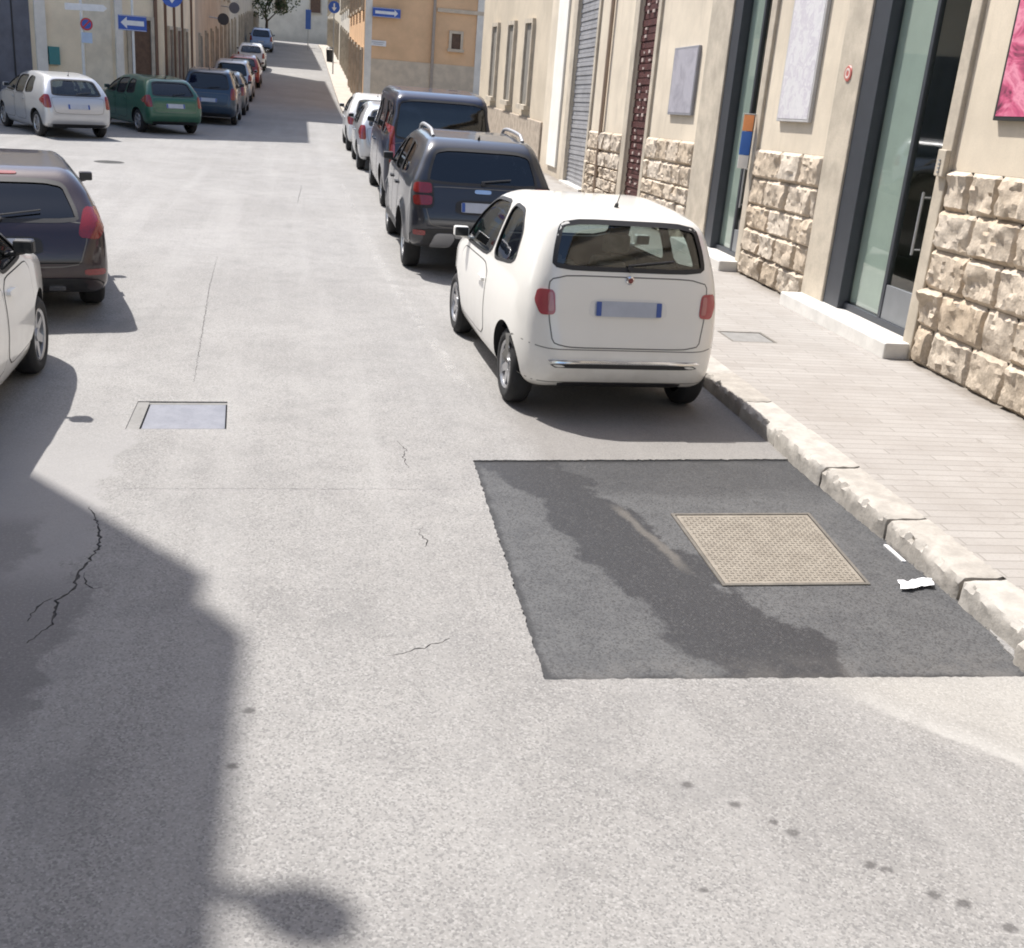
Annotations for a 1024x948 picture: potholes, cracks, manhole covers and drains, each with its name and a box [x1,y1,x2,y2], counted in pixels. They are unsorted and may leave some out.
crack [27,508,102,643]
manhole cover [126,402,227,429]
manhole cover [671,513,871,587]
utility cover [718,331,777,343]
crack [194,260,216,379]
